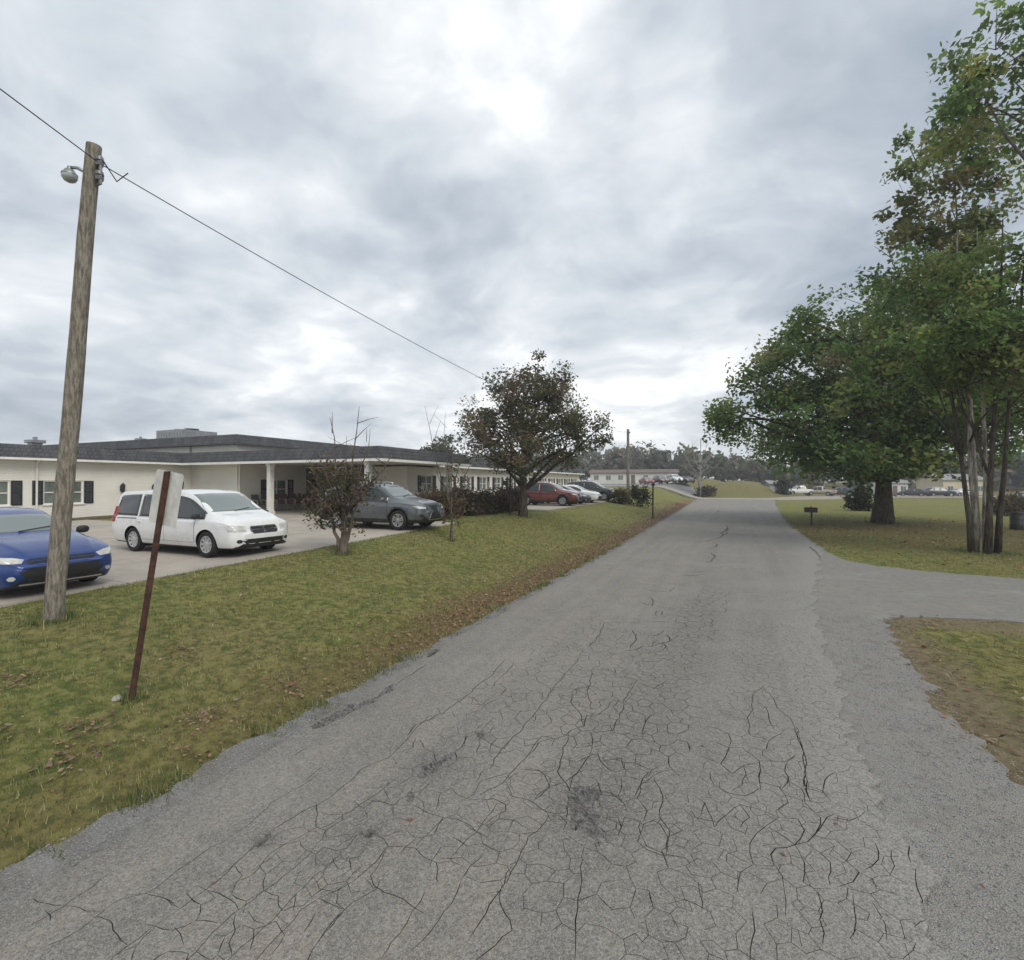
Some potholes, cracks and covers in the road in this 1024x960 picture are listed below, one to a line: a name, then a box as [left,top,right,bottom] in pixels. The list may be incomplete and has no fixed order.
pothole [560,786,607,841]
crack [27,510,928,960]
pothole [416,753,455,779]
